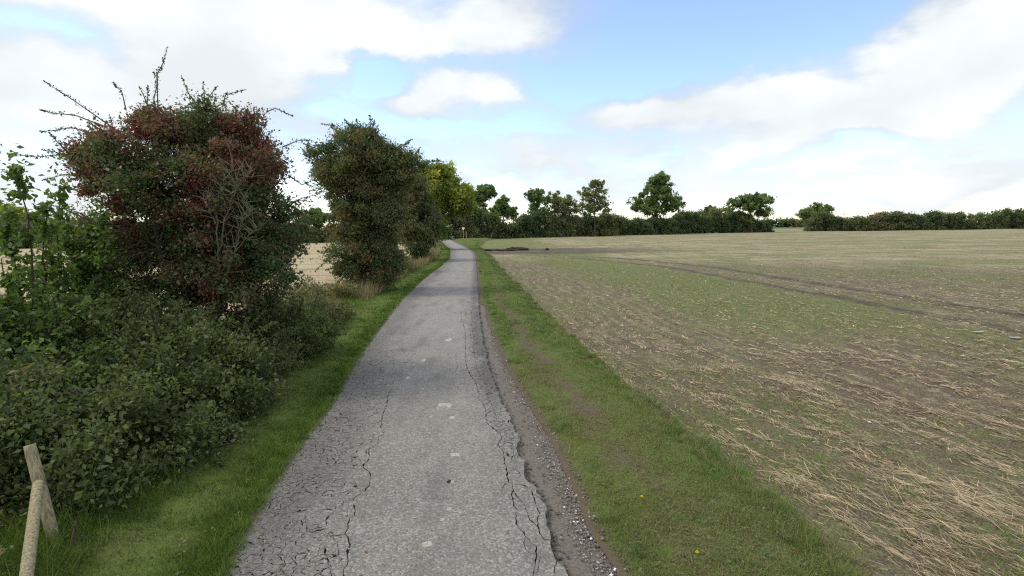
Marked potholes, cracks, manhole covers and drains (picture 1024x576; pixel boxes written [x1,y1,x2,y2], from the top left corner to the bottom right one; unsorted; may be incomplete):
crack [456,294,557,576]
crack [231,348,416,576]
